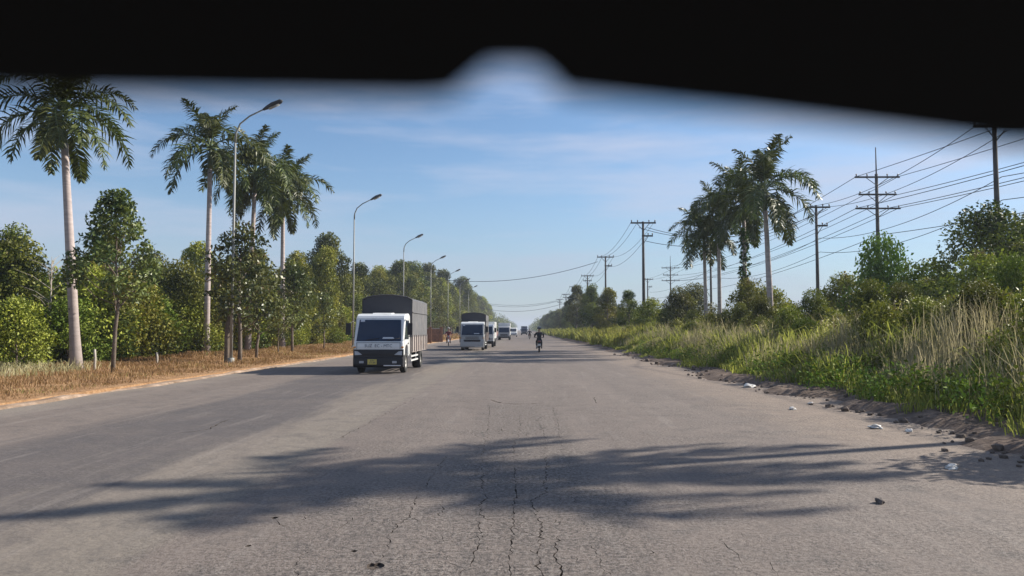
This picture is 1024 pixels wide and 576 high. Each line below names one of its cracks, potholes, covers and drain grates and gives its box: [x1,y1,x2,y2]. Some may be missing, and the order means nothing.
crack [378,457,447,572]
crack [420,408,611,576]
